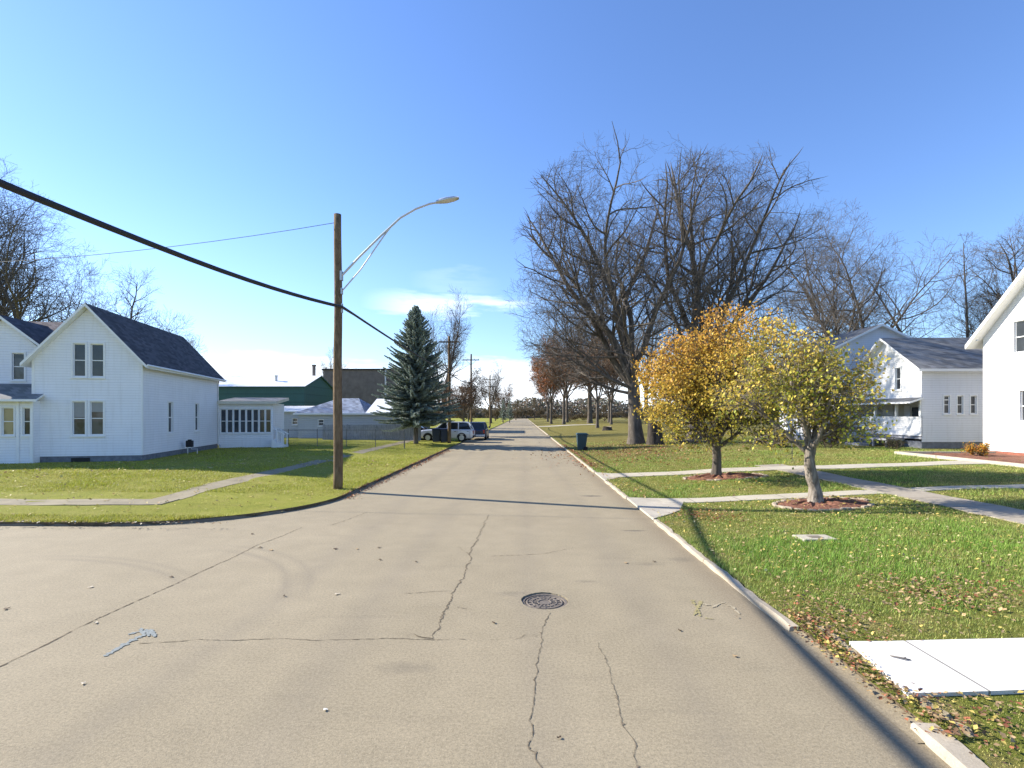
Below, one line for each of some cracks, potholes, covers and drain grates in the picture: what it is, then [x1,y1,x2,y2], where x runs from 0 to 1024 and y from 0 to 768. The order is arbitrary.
manhole cover [522,594,567,609]
crack [598,643,639,768]
crack [138,517,550,768]
